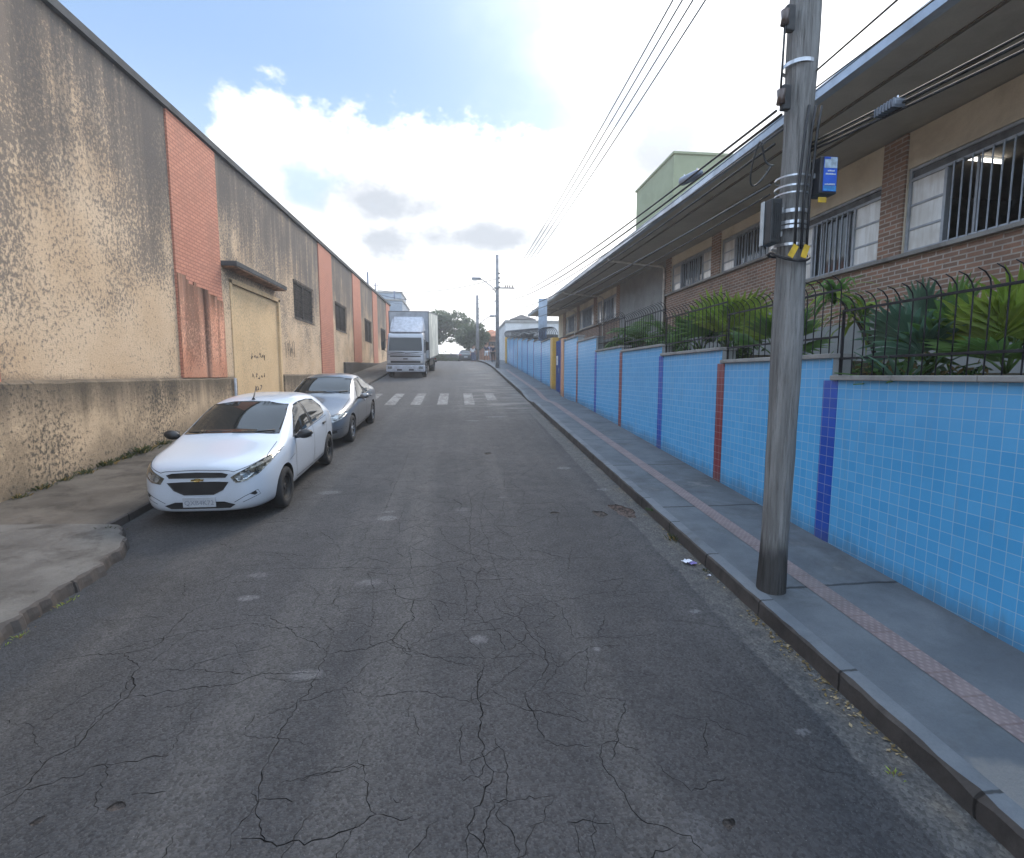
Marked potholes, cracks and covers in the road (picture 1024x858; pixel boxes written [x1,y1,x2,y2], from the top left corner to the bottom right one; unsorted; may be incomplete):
pothole [722,818,735,830]
pothole [106,801,126,812]
crack [2,442,767,858]
